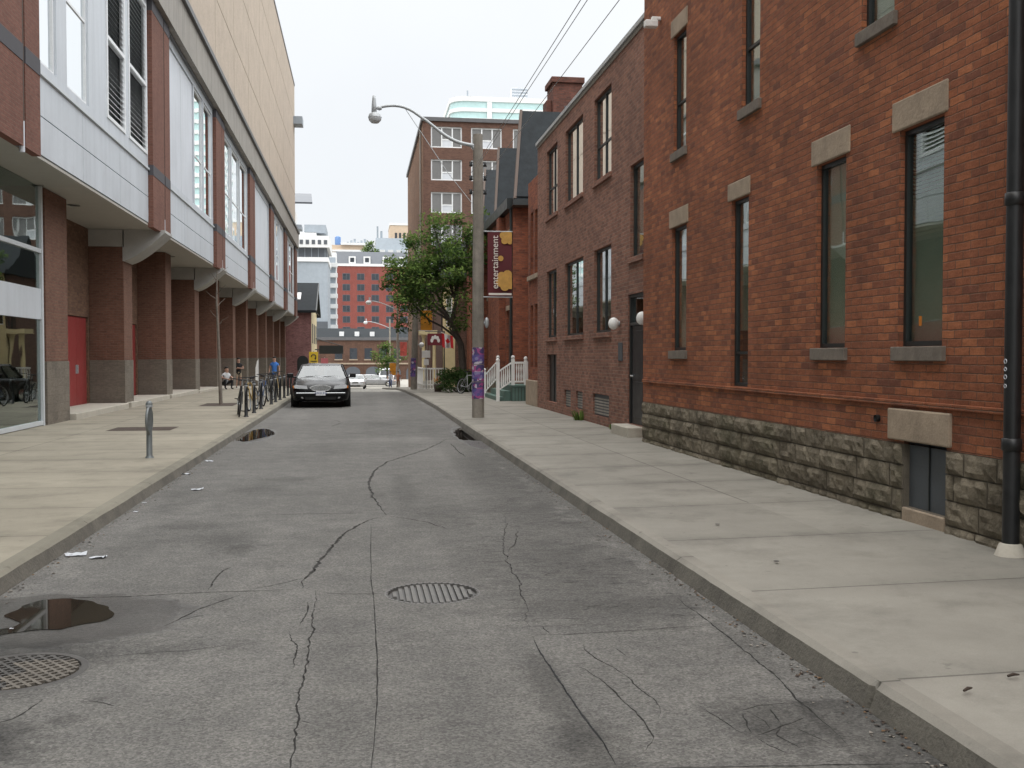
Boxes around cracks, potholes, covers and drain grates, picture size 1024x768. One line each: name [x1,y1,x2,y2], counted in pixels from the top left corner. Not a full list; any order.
crack [502,519,699,757]
crack [47,442,464,768]
manhole cover [0,652,89,693]
pothole [453,427,476,441]
crack [671,703,928,768]
